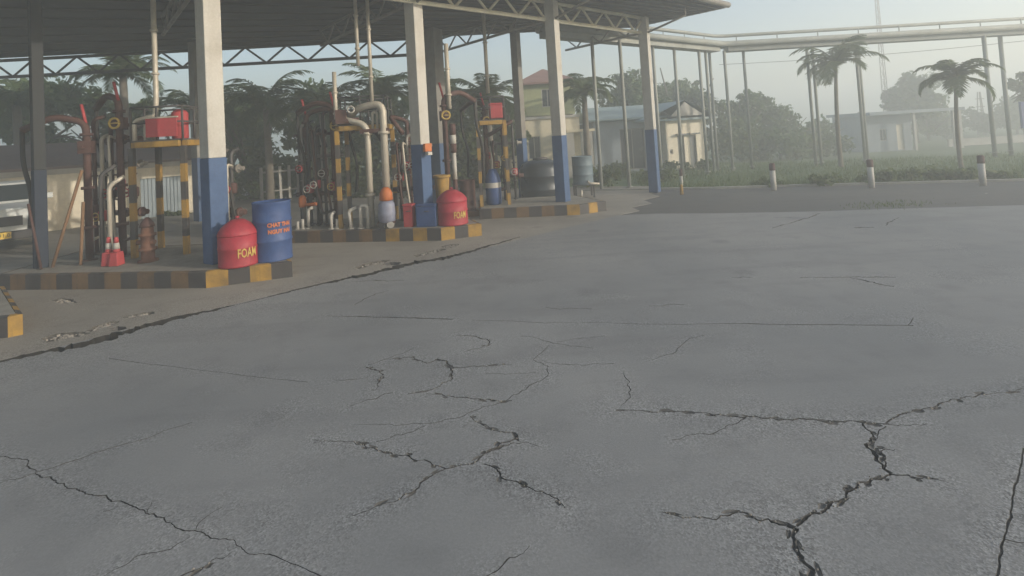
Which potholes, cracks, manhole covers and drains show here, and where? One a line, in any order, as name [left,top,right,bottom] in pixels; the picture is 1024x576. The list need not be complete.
pothole [41,332,90,342]
crack [0,425,321,576]
pothole [86,321,119,332]
crack [615,373,1024,576]
crack [325,335,614,516]
